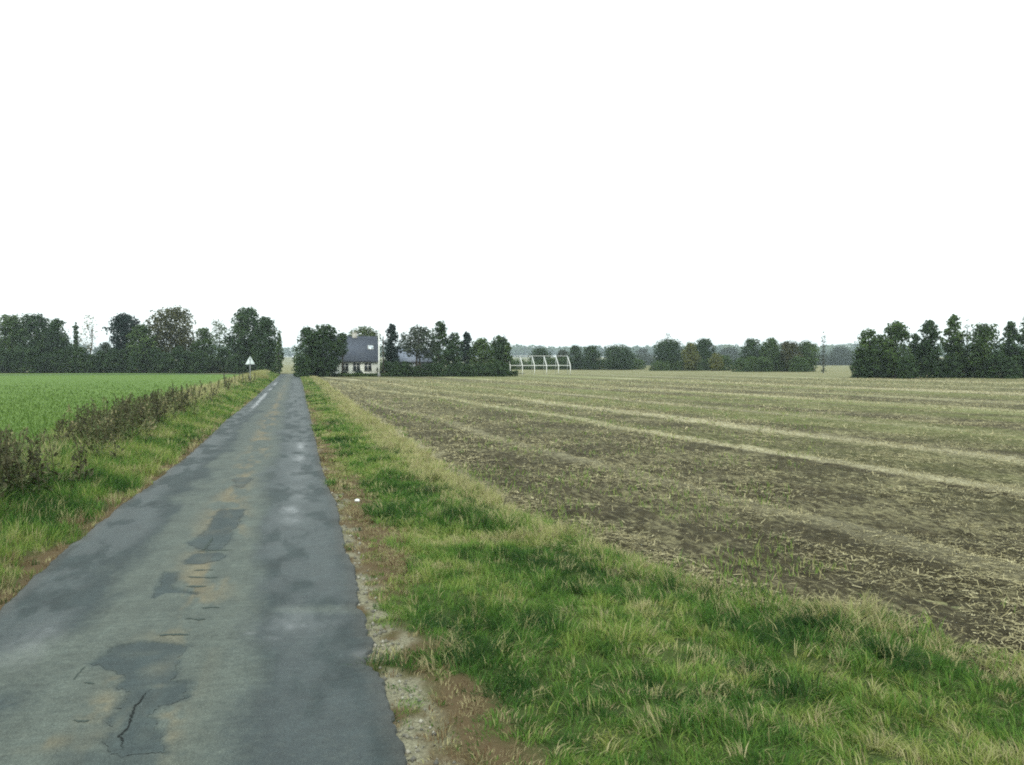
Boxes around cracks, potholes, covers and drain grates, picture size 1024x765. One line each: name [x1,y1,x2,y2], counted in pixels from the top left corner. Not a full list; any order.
crack [117,691,148,747]
crack [189,569,217,587]
crack [160,607,218,636]
